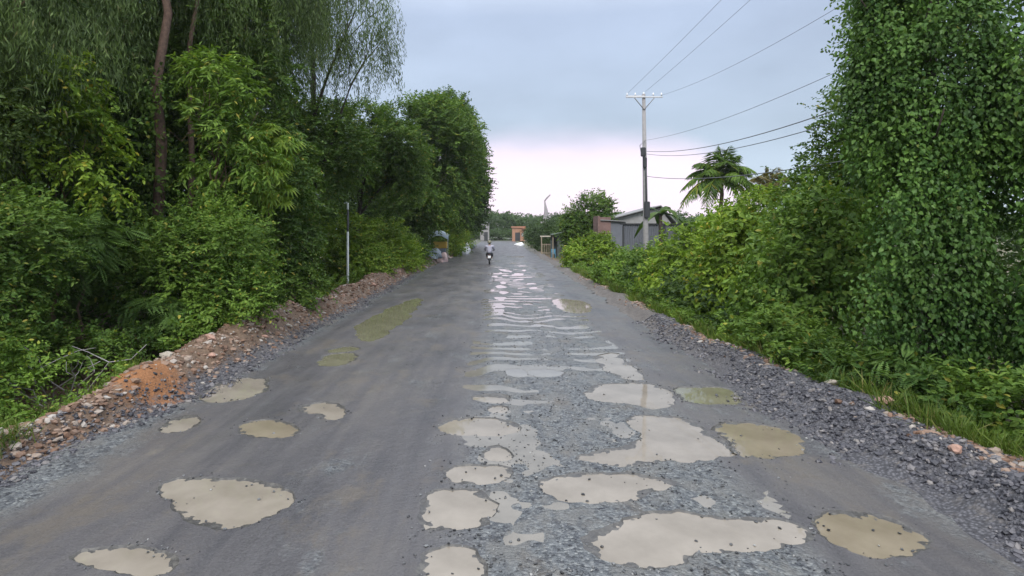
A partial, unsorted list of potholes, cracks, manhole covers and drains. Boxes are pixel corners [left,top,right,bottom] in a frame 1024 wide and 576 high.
pothole [480,445,514,462]
pothole [158,476,296,530]
pothole [68,544,179,576]
pothole [574,415,740,467]
pothole [538,472,677,504]
pothole [195,377,270,403]
pothole [415,544,488,576]
pothole [580,509,815,570]
pothole [157,415,202,433]
pothole [583,382,677,410]
pothole [417,488,499,531]
pothole [444,464,514,485]
